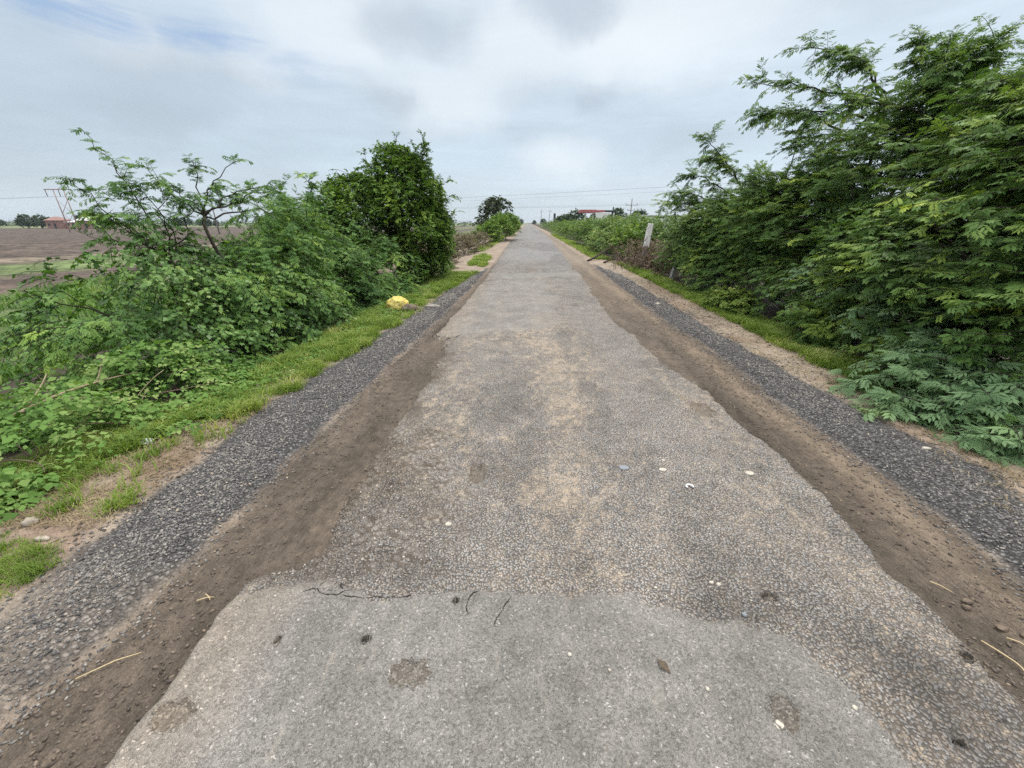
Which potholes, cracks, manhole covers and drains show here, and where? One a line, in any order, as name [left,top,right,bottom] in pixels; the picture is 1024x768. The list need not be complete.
crack [461,589,514,627]
crack [302,580,411,602]
